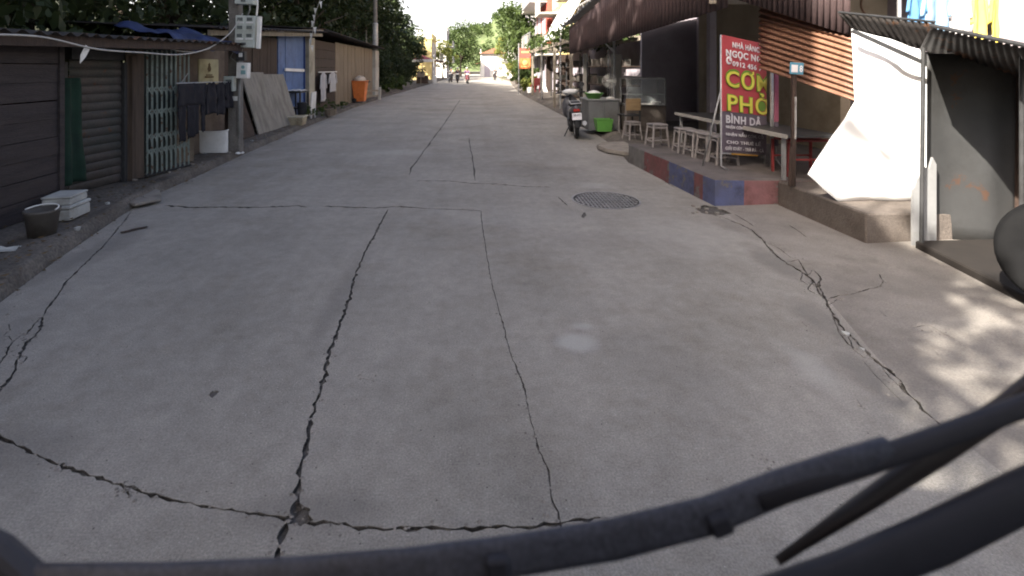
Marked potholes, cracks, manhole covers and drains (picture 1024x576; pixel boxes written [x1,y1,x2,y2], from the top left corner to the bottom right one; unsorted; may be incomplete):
crack [452,139,530,187]
crack [715,215,937,422]
crack [0,218,127,391]
crack [481,215,561,526]
